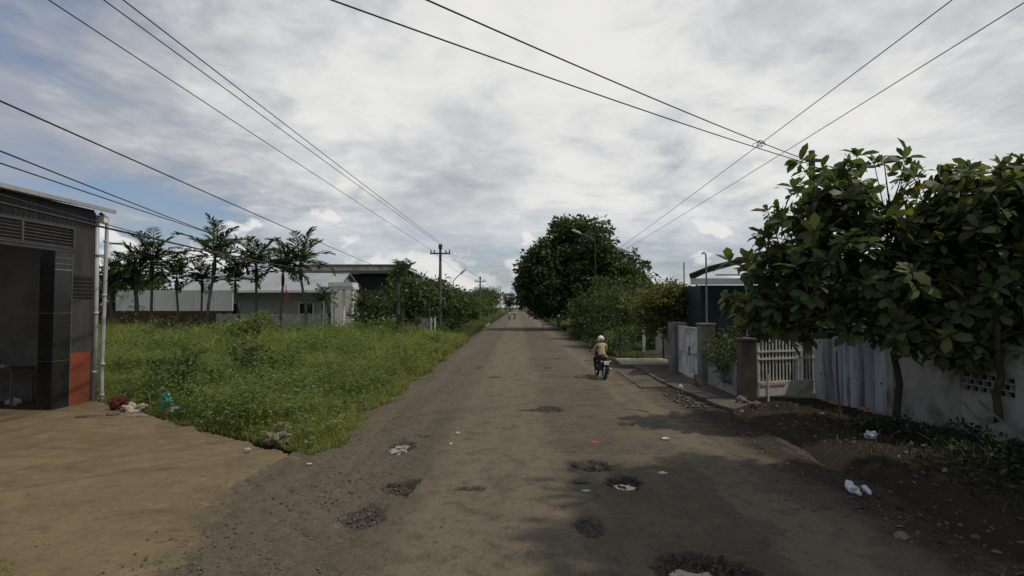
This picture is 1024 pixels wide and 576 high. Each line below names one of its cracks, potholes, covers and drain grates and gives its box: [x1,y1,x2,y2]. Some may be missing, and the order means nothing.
pothole [381,439,417,457]
pothole [333,502,392,532]
pothole [569,459,614,472]
pothole [449,484,489,492]
pothole [379,478,425,499]
pothole [570,514,609,539]
pothole [647,550,765,576]
pothole [602,475,644,491]
